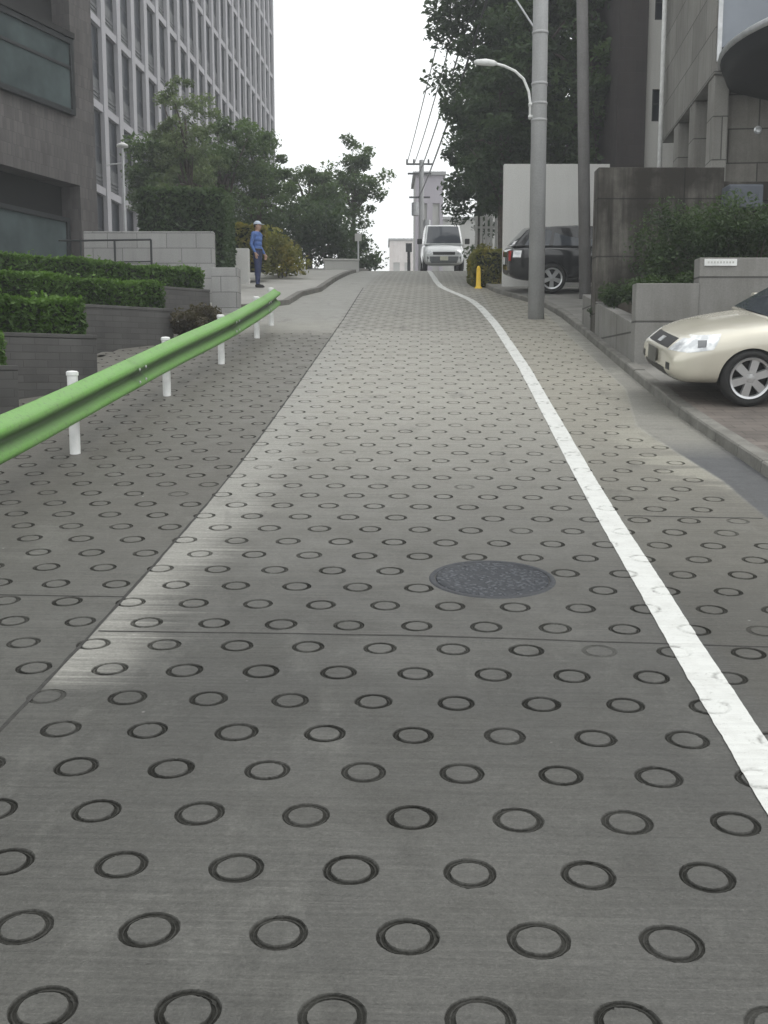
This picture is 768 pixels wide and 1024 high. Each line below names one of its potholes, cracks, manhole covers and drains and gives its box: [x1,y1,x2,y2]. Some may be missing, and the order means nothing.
manhole cover [429,560,556,599]
